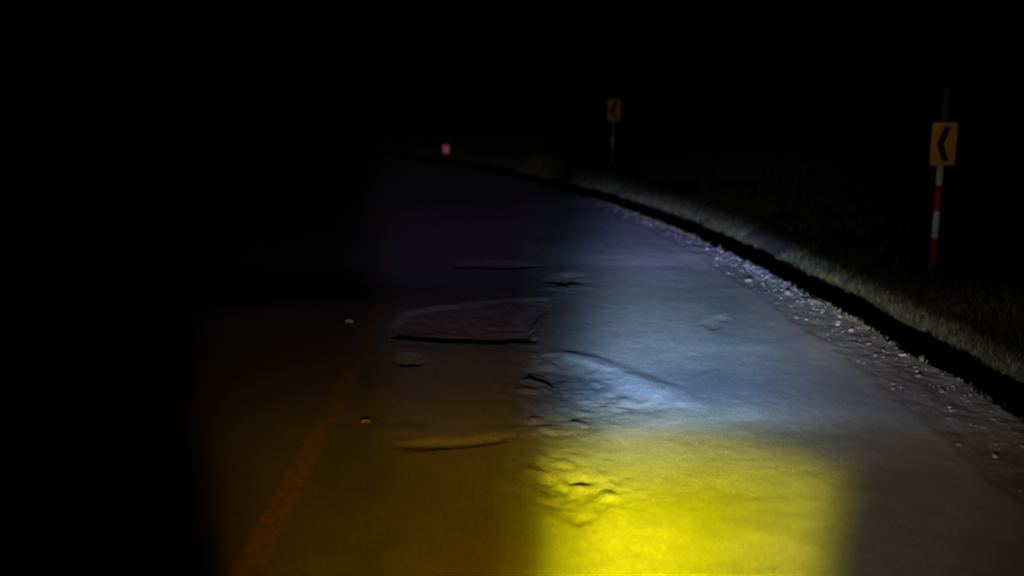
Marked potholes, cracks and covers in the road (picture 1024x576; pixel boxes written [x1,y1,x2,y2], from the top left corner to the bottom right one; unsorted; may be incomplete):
pothole [539,270,593,287]
pothole [384,430,516,453]
pothole [516,454,625,536]
pothole [448,258,549,271]
pothole [391,351,429,367]
